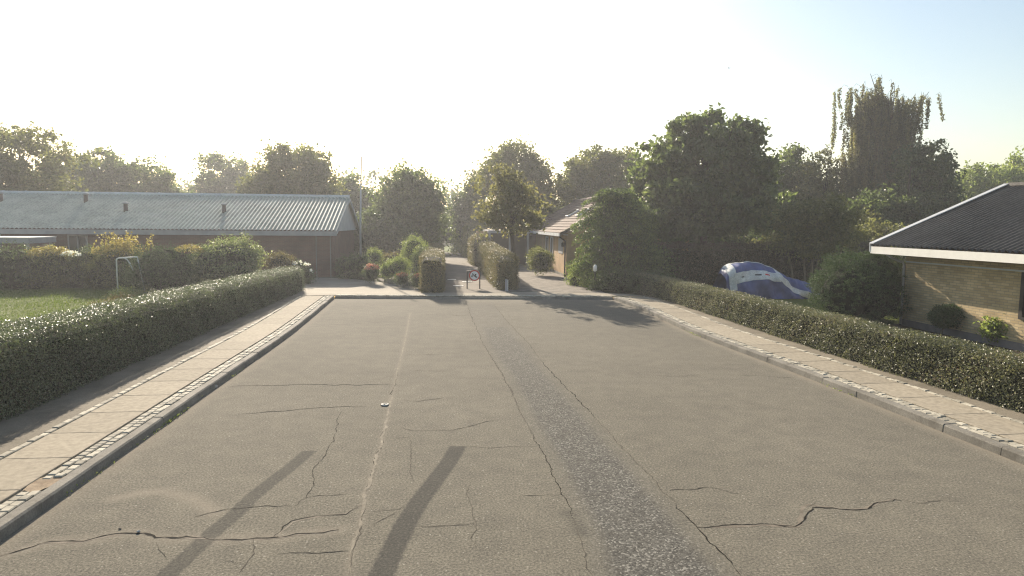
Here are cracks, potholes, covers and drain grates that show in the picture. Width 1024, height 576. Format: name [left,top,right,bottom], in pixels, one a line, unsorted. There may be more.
crack [494,305,957,574]
crack [456,305,591,573]
crack [0,316,519,575]
